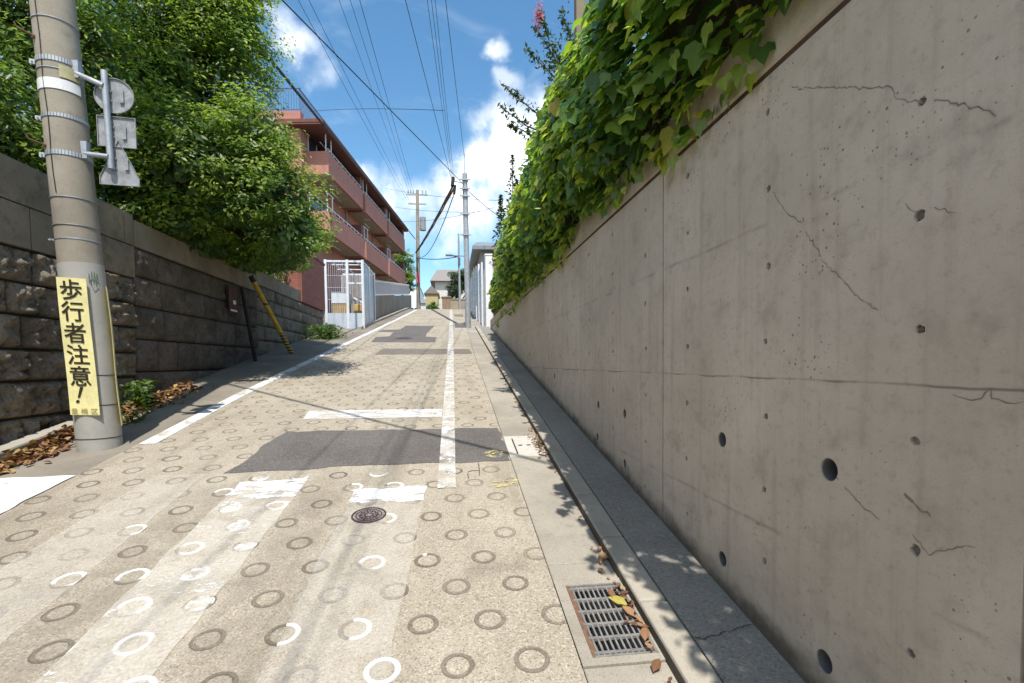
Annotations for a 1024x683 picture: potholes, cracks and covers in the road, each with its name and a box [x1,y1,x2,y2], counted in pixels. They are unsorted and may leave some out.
manhole cover [351,507,386,524]
drain grate [554,577,666,672]
